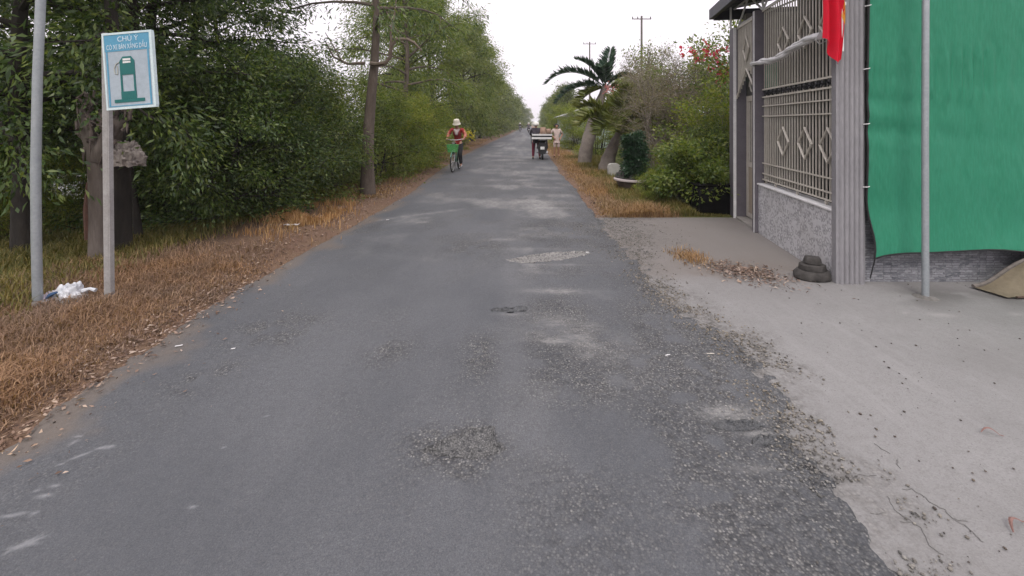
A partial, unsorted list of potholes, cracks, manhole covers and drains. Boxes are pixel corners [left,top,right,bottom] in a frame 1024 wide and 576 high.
pothole [713,419,764,432]
pothole [421,425,507,459]
